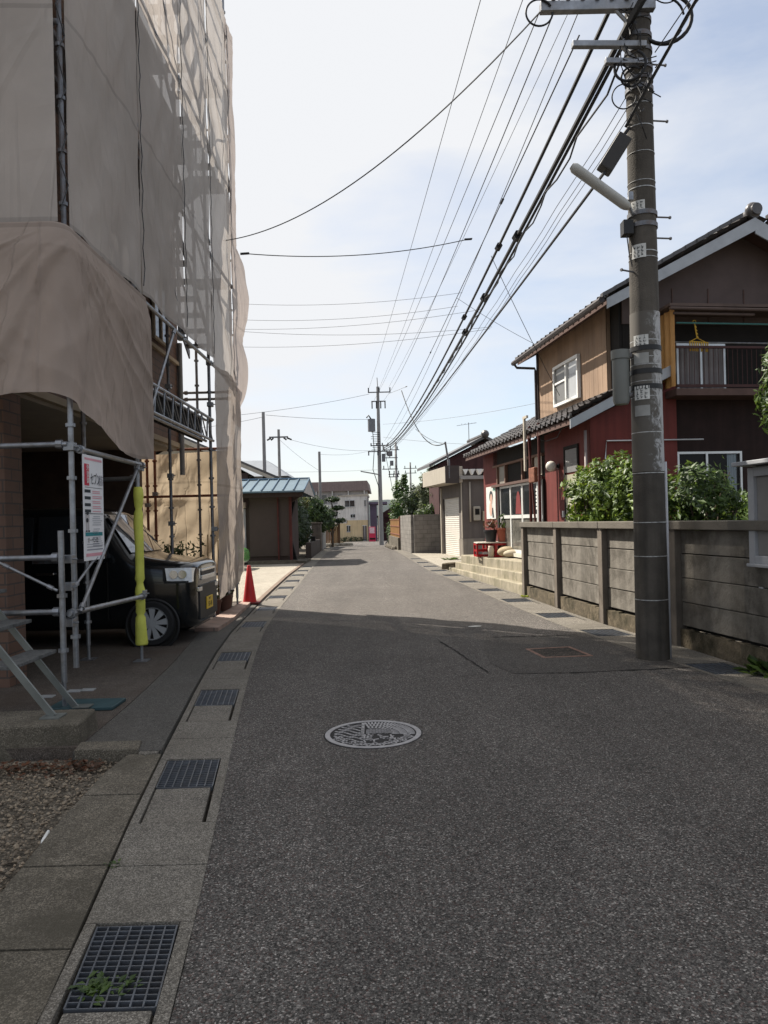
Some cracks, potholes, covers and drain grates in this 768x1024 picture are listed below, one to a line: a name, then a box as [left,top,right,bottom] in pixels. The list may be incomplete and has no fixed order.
drain grate [217,652,251,663]
drain grate [156,760,220,791]
drain grate [686,663,750,674]
manhole cover [324,720,423,749]
utility cover [526,646,593,658]
drain grate [63,925,178,1016]
drain grate [194,690,239,708]
